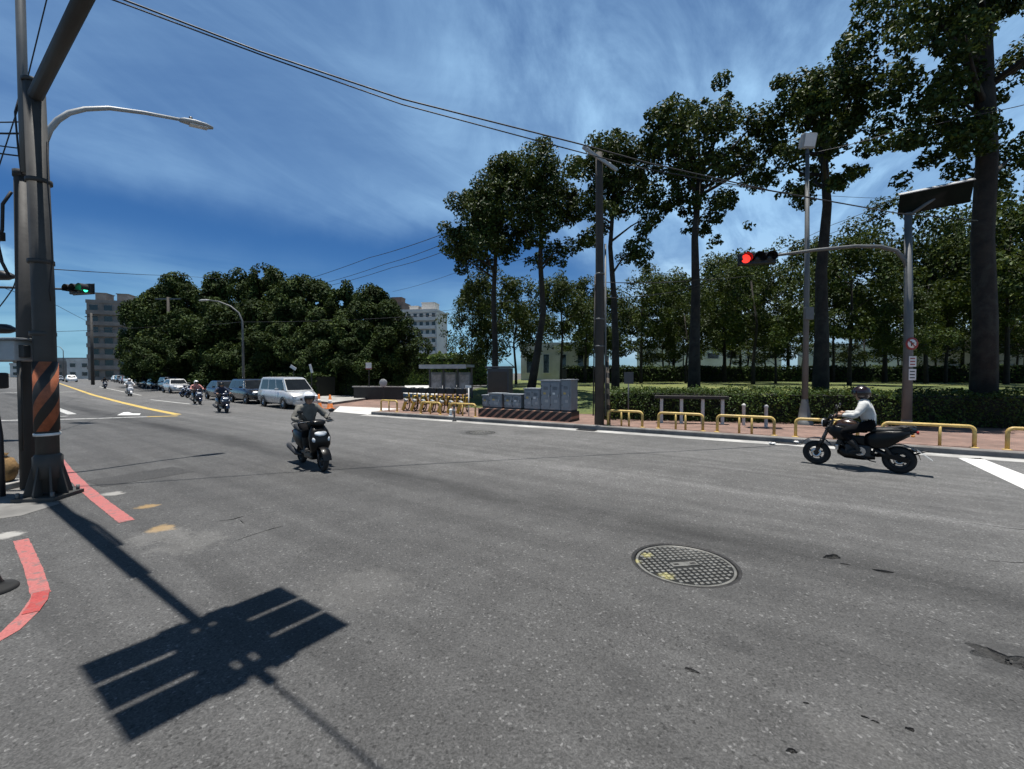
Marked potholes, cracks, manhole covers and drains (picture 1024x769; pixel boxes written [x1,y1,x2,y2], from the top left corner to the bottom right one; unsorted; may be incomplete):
manhole cover [631,543,742,589]
pothole [964,642,1024,670]
